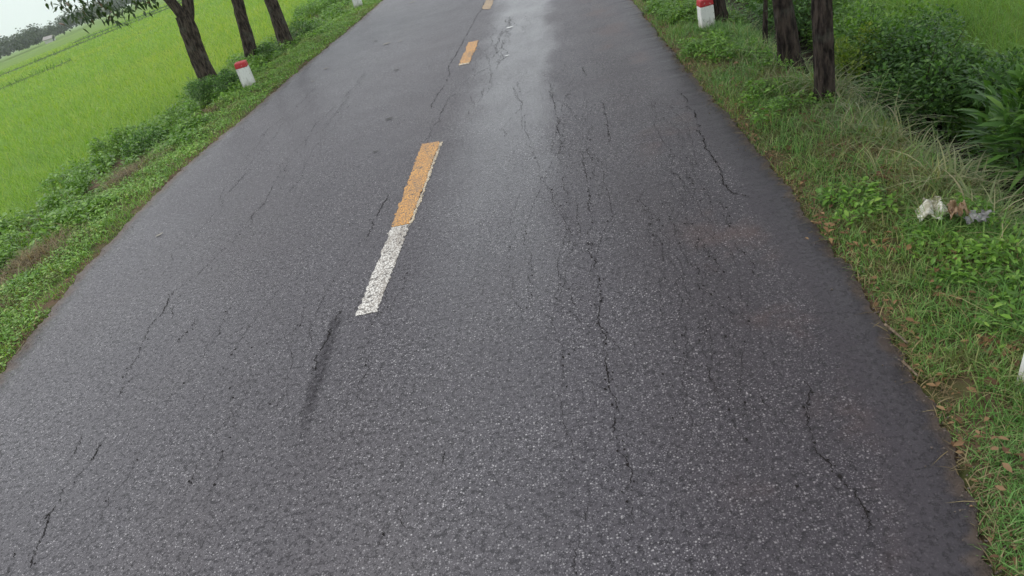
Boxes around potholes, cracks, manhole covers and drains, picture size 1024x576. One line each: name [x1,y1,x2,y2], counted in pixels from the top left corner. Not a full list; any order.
crack [80,263,408,547]
crack [7,434,101,575]
crack [120,74,367,393]
crack [802,381,872,532]
crack [428,3,636,526]
